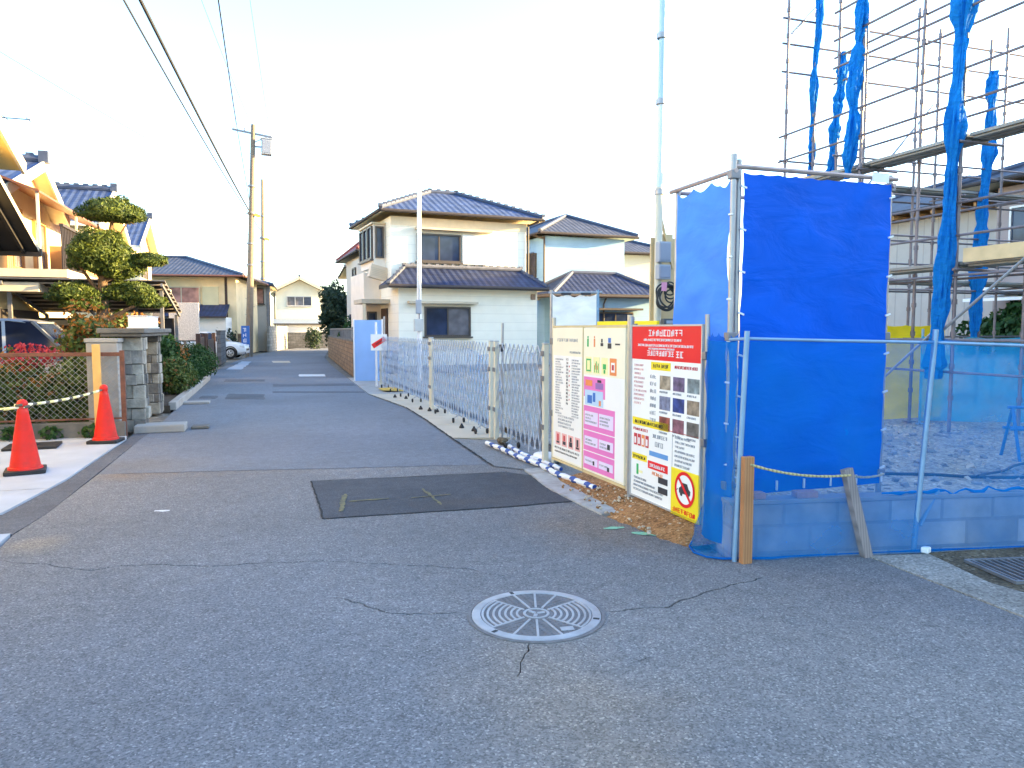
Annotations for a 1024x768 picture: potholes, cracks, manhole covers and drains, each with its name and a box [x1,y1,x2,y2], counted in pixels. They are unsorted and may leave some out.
drain grate [964,557,1024,585]
manhole cover [468,589,605,644]
